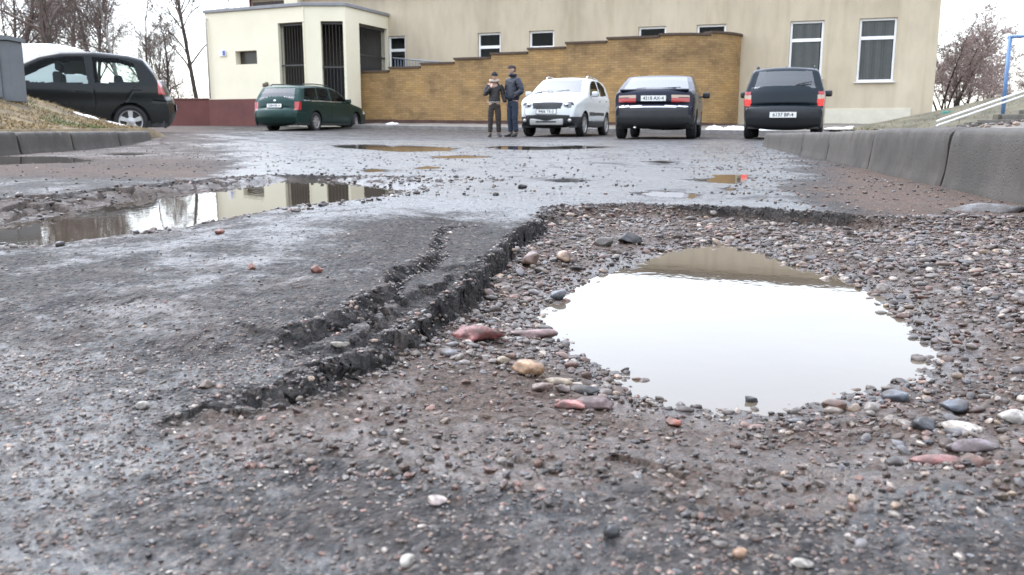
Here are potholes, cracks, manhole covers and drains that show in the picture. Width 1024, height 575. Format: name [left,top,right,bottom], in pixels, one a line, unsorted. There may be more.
pothole [102,202,1024,573]
pothole [0,173,510,250]
pothole [671,174,763,185]
pothole [329,144,459,152]
